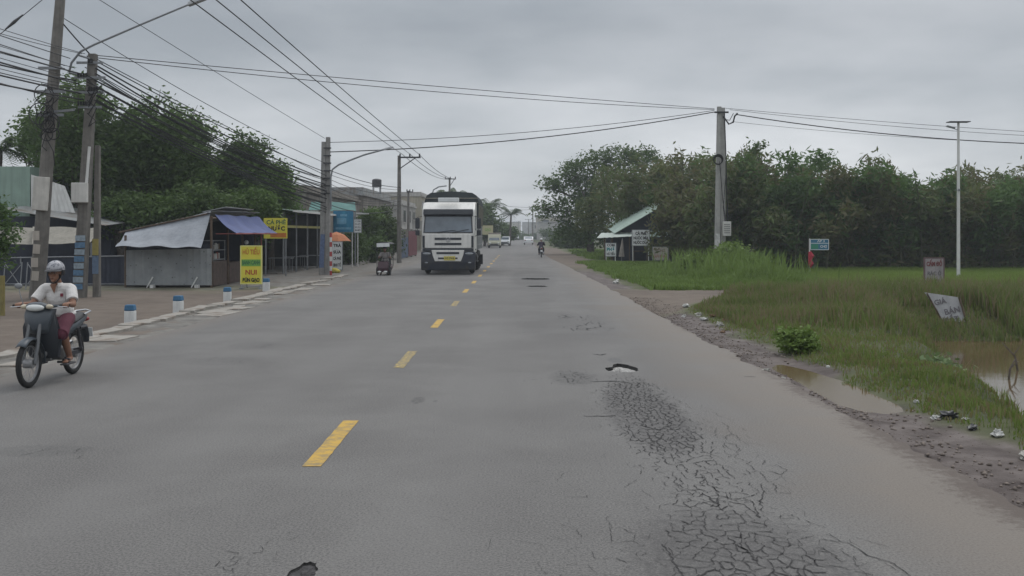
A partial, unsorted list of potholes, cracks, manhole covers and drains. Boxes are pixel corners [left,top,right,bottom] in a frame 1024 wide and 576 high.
pothole [287,562,318,576]
crack [215,527,299,573]
pothole [605,363,638,372]
crack [531,354,911,576]
